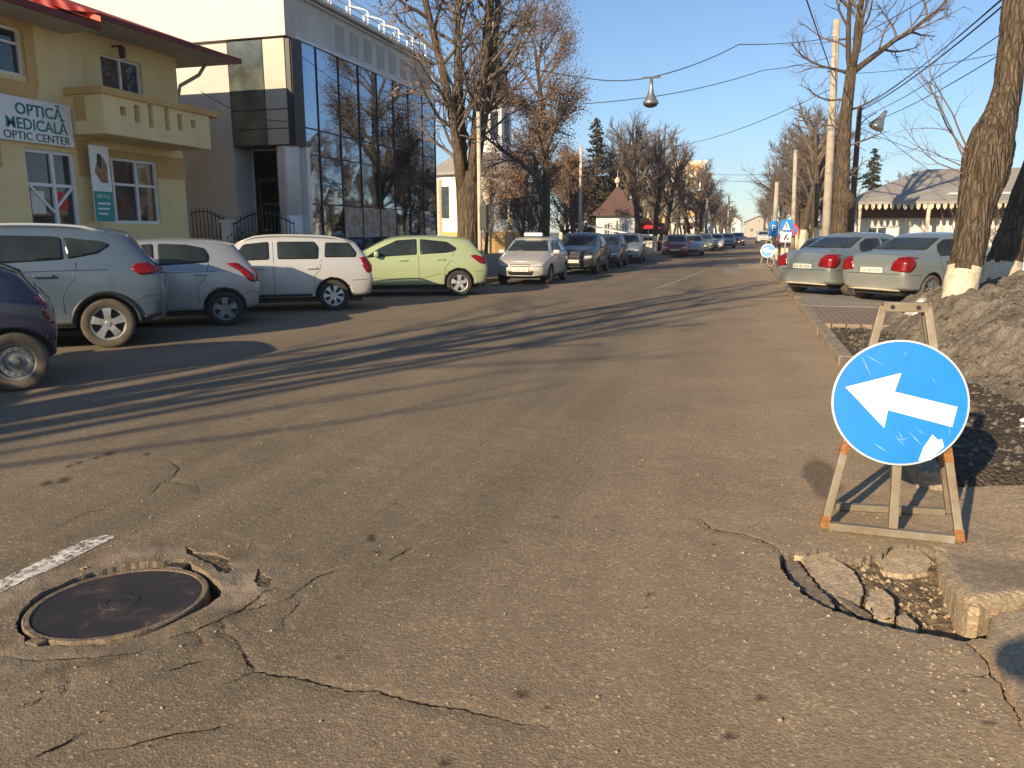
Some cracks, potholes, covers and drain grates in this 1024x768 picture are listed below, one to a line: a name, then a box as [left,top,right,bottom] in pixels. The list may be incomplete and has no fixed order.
crack [1,567,547,728]
pothole [779,545,992,641]
crack [33,720,245,758]
manhole cover [15,559,224,647]
